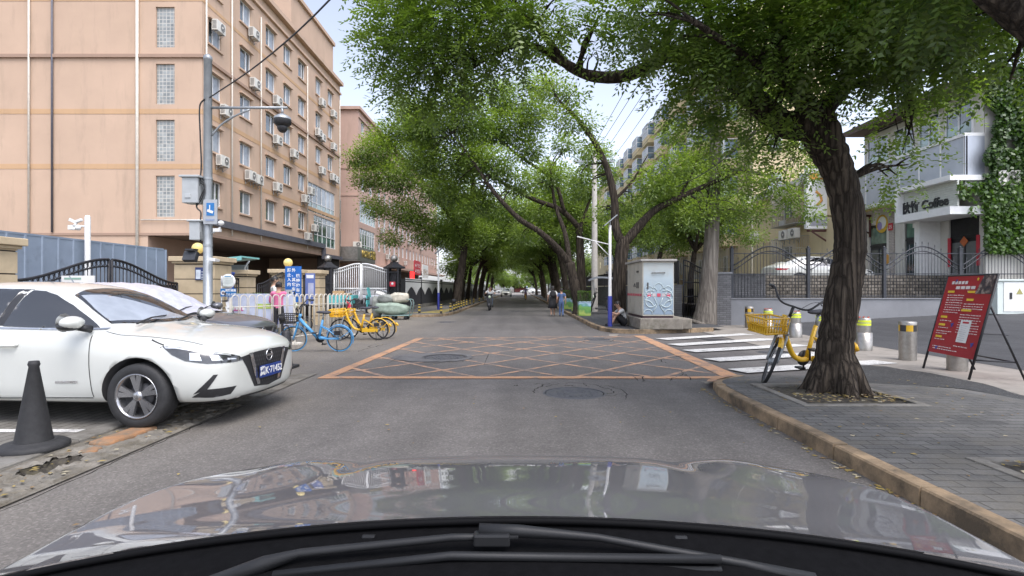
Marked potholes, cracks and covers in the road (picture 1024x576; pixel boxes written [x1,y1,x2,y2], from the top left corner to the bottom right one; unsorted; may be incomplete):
pothole [16,456,83,476]
manhole cover [542,387,607,399]
crack [514,356,691,396]
